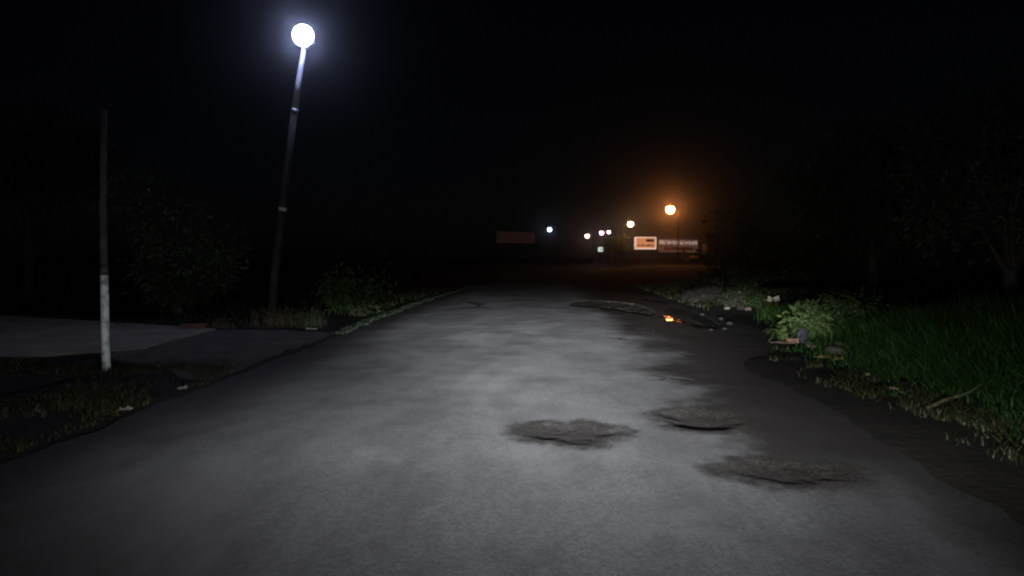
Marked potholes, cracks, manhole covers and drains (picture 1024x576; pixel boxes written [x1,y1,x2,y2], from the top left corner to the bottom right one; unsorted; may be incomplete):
pothole [567,300,656,316]
pothole [517,422,624,446]
pothole [656,408,747,432]
pothole [713,459,857,485]
pothole [658,306,721,329]
